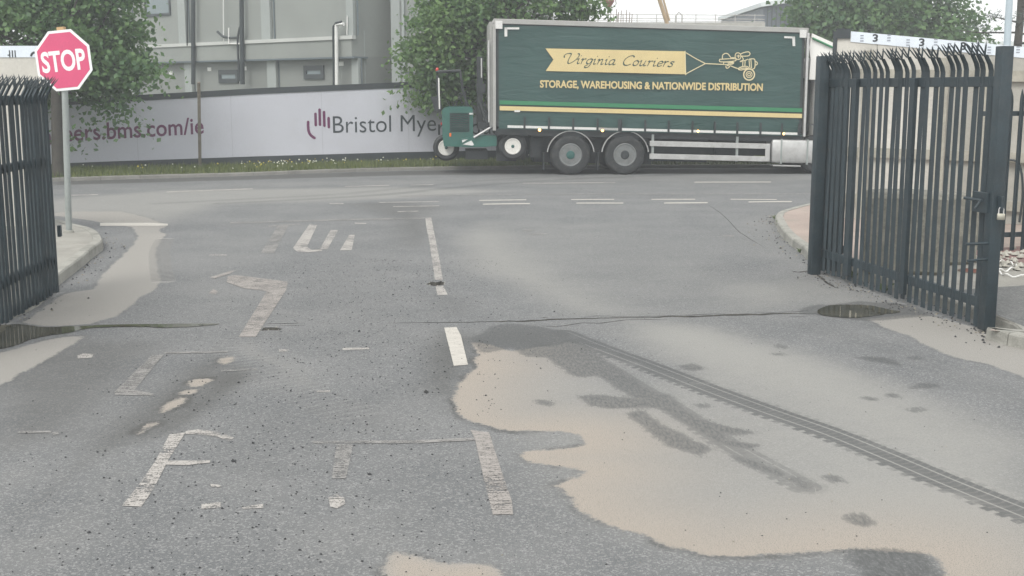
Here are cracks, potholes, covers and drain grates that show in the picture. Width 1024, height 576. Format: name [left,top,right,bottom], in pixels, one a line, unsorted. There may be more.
crack [416,310,816,327]
